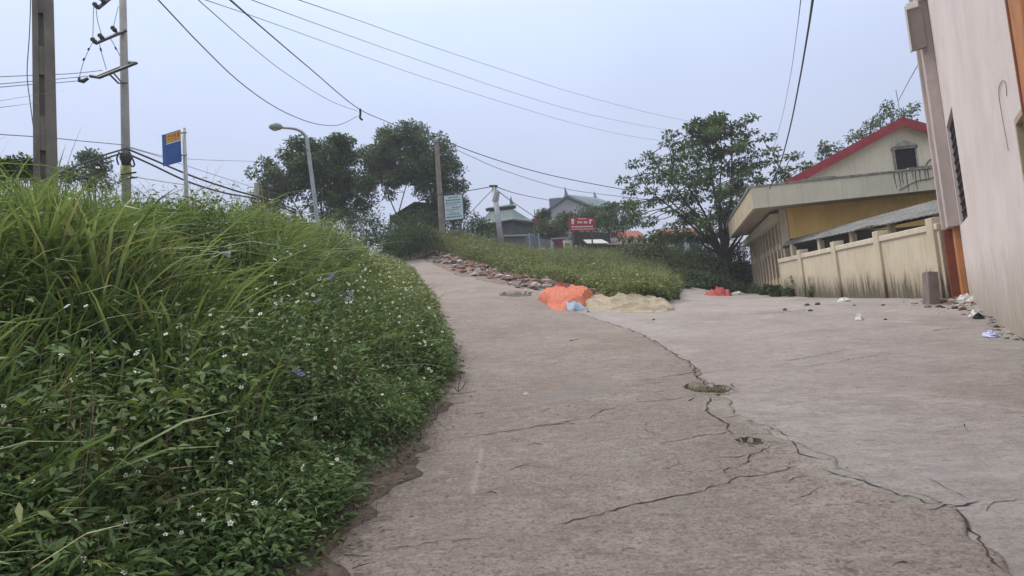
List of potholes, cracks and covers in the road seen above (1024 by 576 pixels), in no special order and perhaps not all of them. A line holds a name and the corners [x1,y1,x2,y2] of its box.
pothole [732,436,767,447]
pothole [678,381,740,395]
crack [554,421,820,525]
crack [464,407,614,445]
